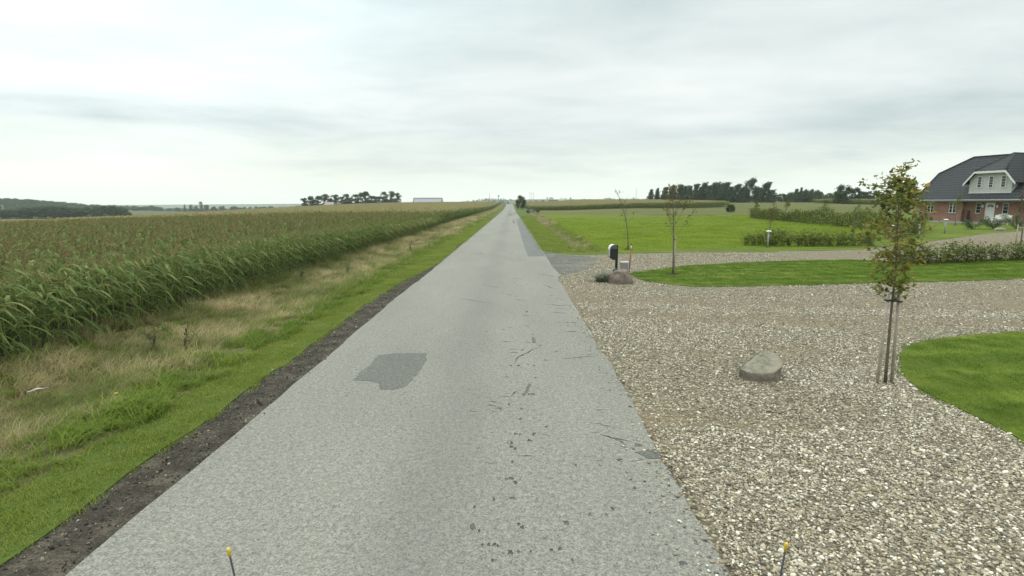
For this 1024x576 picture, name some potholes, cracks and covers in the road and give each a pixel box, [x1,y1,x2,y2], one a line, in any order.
crack [470,341,591,412]
crack [594,402,639,462]
